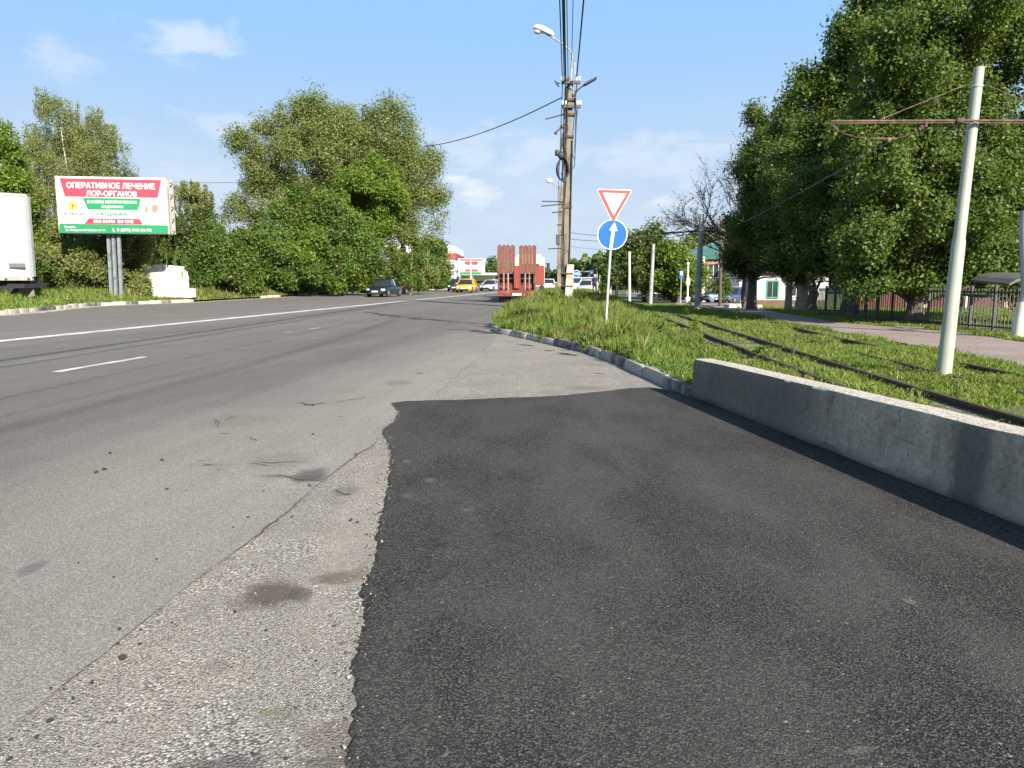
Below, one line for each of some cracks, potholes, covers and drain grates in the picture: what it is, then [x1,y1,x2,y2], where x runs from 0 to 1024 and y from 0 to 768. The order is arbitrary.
crack [2,438,379,733]
